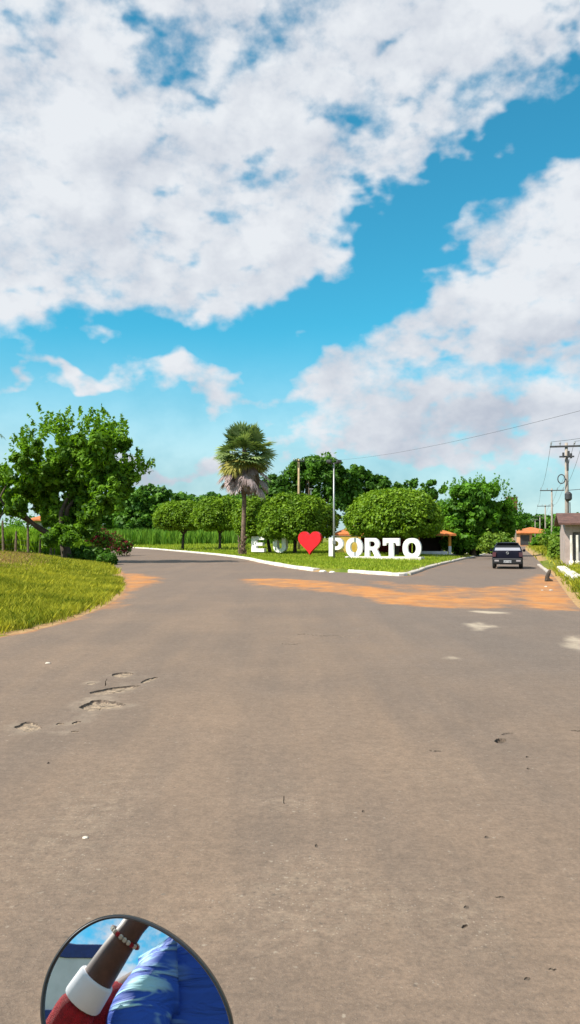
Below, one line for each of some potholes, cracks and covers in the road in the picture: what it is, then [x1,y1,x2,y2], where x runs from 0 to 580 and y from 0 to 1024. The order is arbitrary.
pothole [14,721,42,732]
pothole [79,699,126,711]
